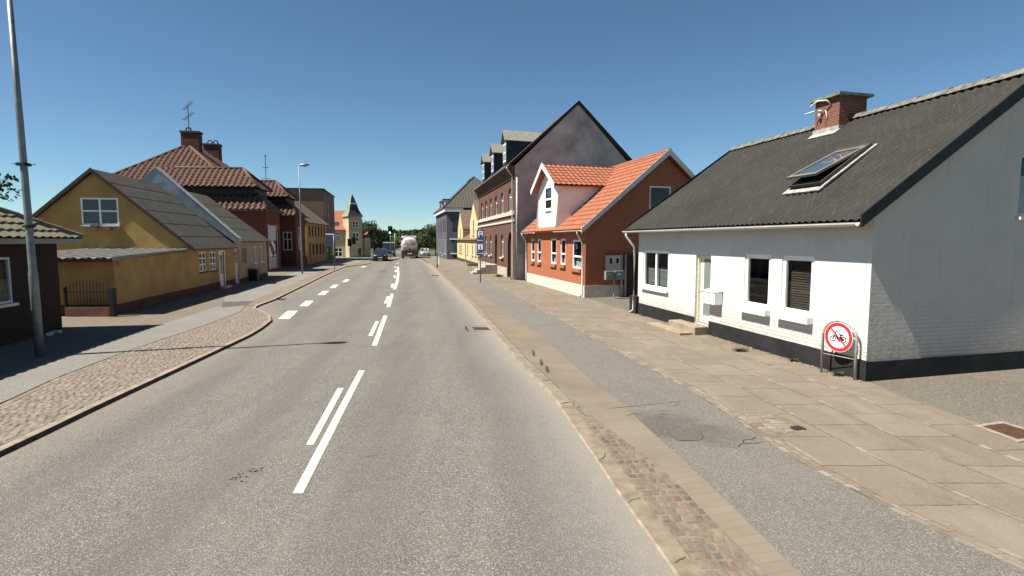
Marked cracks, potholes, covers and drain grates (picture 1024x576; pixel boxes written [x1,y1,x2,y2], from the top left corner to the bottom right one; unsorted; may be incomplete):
utility cover [973,421,1024,442]
